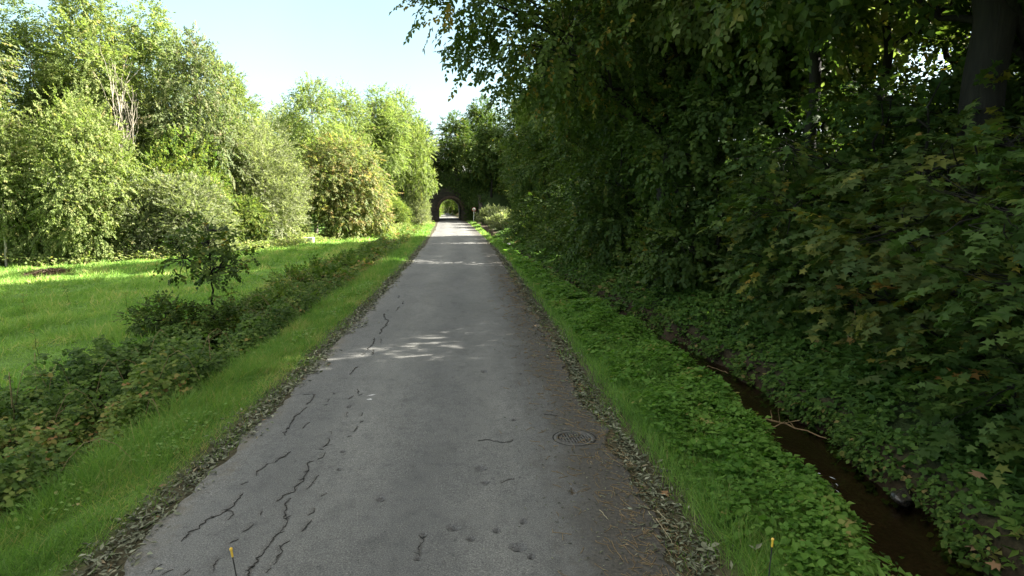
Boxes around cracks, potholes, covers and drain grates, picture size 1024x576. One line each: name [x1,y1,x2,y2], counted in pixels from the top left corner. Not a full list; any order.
manhole cover [552,430,597,446]
crack [181,297,404,576]
